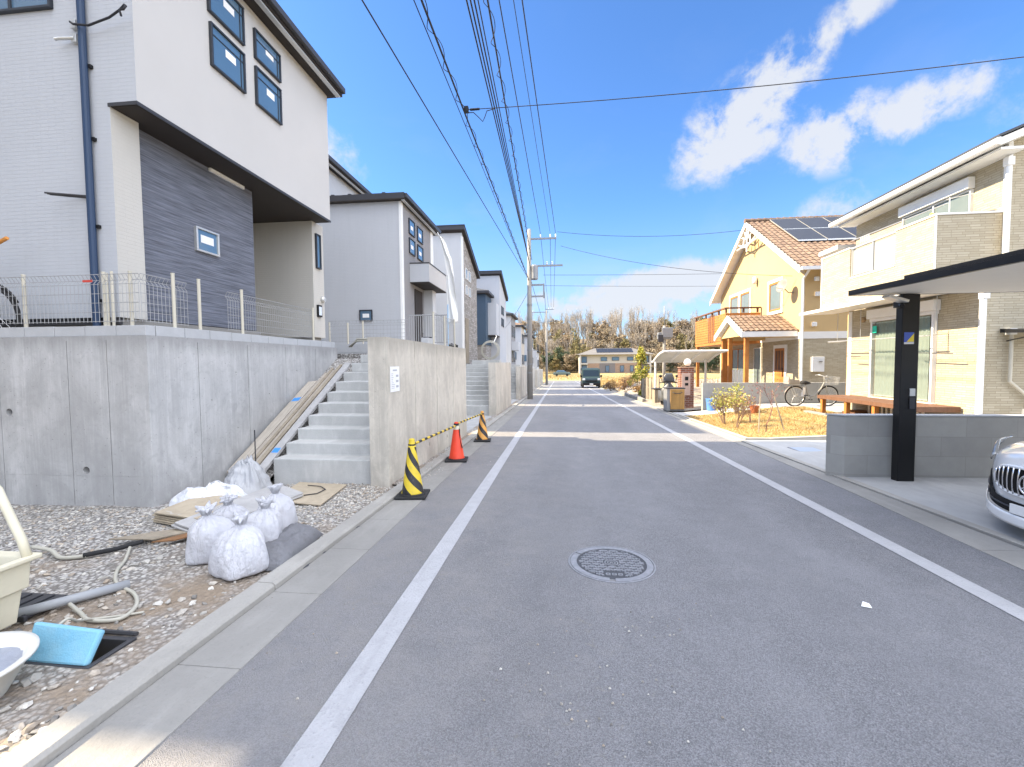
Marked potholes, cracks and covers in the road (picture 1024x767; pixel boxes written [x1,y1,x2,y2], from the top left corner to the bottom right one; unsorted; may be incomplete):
manhole cover [568,546,656,583]
